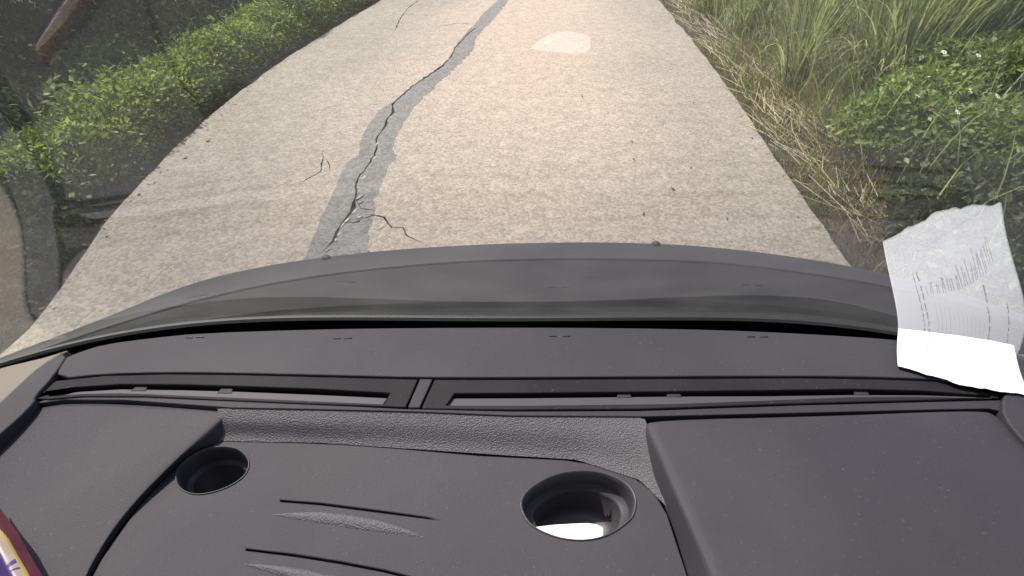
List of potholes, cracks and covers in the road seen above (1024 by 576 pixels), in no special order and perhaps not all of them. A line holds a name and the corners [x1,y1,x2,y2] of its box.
crack [299,23,476,252]
